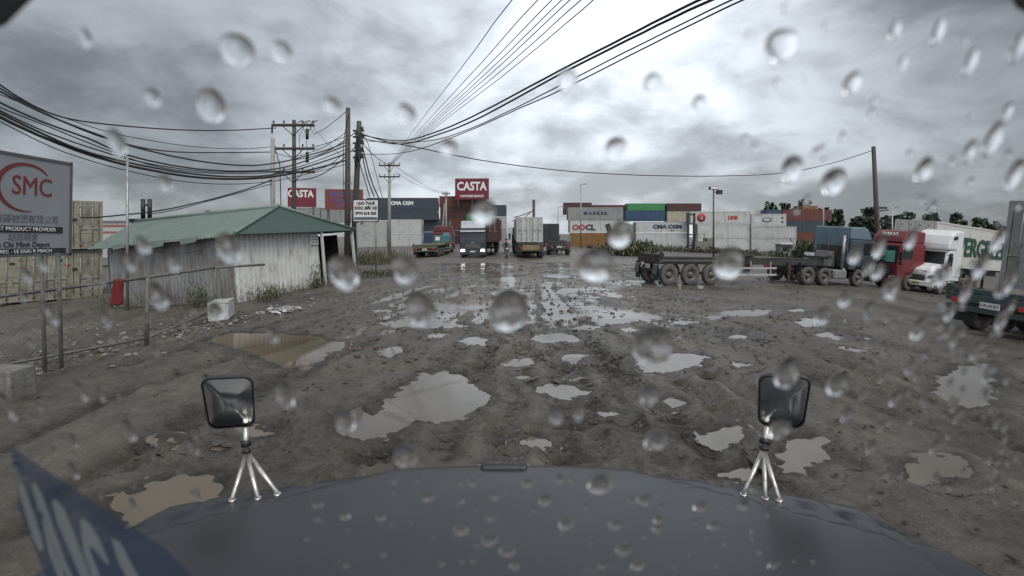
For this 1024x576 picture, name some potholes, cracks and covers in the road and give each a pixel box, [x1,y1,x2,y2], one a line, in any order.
pothole [78,457,266,527]
pothole [903,359,1024,418]
pothole [180,327,371,377]
pothole [512,376,608,409]
pothole [681,411,764,460]
pothole [740,424,866,492]
pothole [610,345,731,384]
pothole [288,361,519,459]
